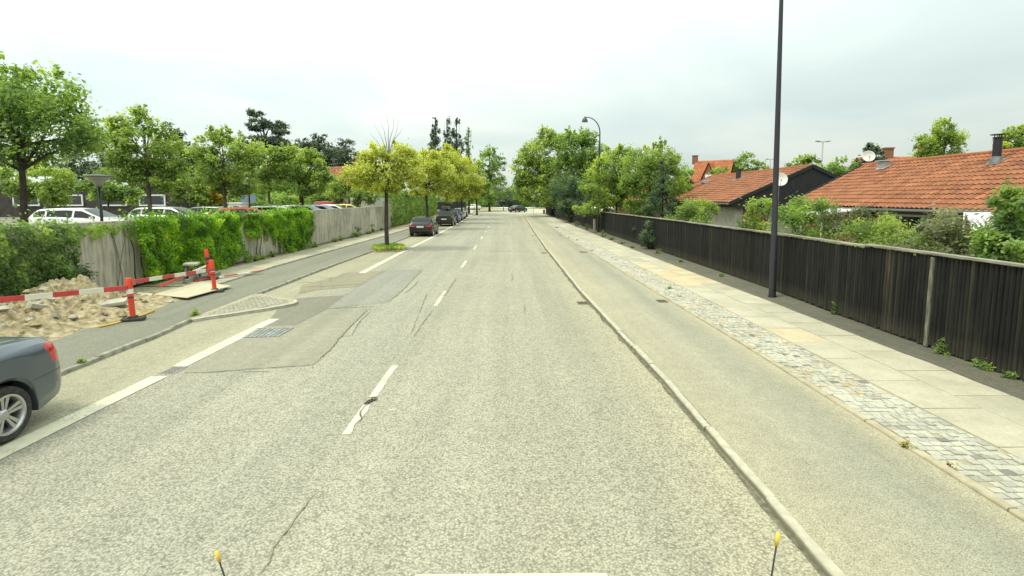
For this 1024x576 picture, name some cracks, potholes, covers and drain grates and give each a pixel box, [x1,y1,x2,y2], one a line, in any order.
crack [258,491,315,575]
crack [389,270,457,337]
crack [194,306,371,373]
